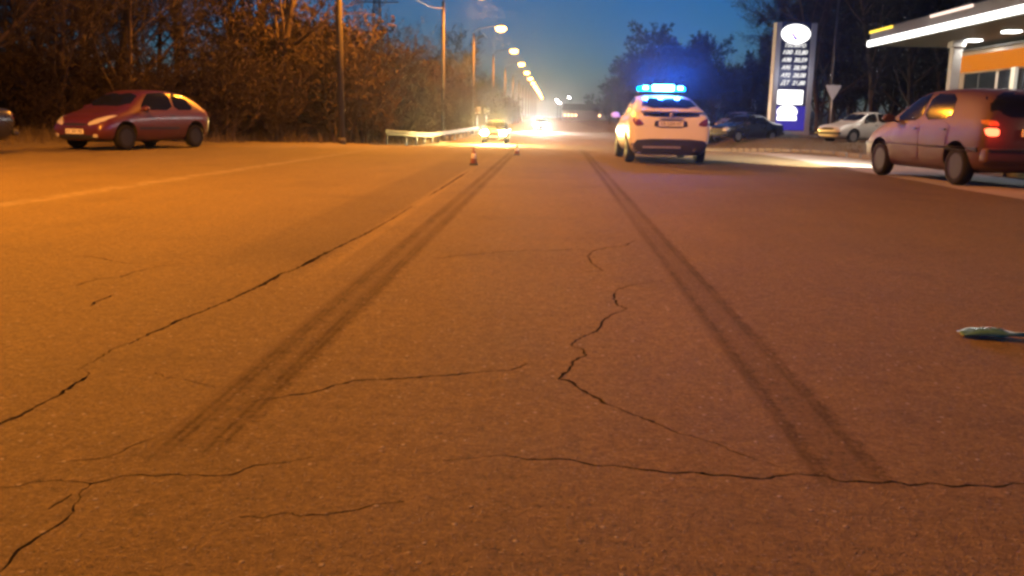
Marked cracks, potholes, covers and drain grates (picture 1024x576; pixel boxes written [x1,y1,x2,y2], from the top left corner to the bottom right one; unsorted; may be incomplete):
crack [443,281,1024,488]
crack [244,364,526,404]
crack [0,173,466,424]
crack [0,438,311,572]
crack [245,501,404,518]
